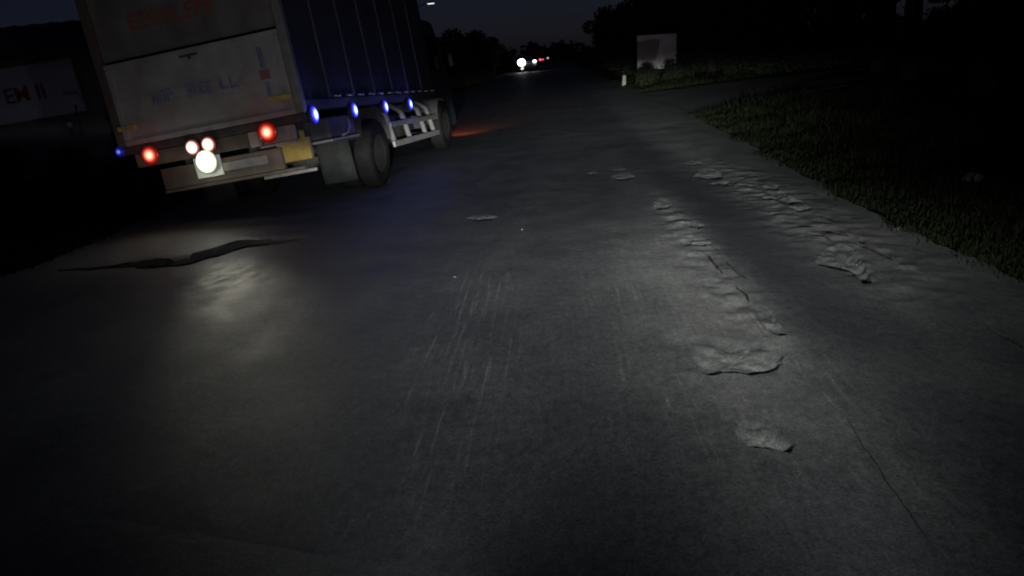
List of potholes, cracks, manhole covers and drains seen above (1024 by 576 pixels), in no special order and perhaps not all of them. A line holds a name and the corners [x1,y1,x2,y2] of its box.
pothole [691,344,784,376]
pothole [755,191,803,205]
pothole [814,244,872,284]
pothole [693,168,723,180]
crack [847,419,934,548]
pothole [789,204,812,212]
crack [698,251,750,303]
pothole [734,419,795,453]
